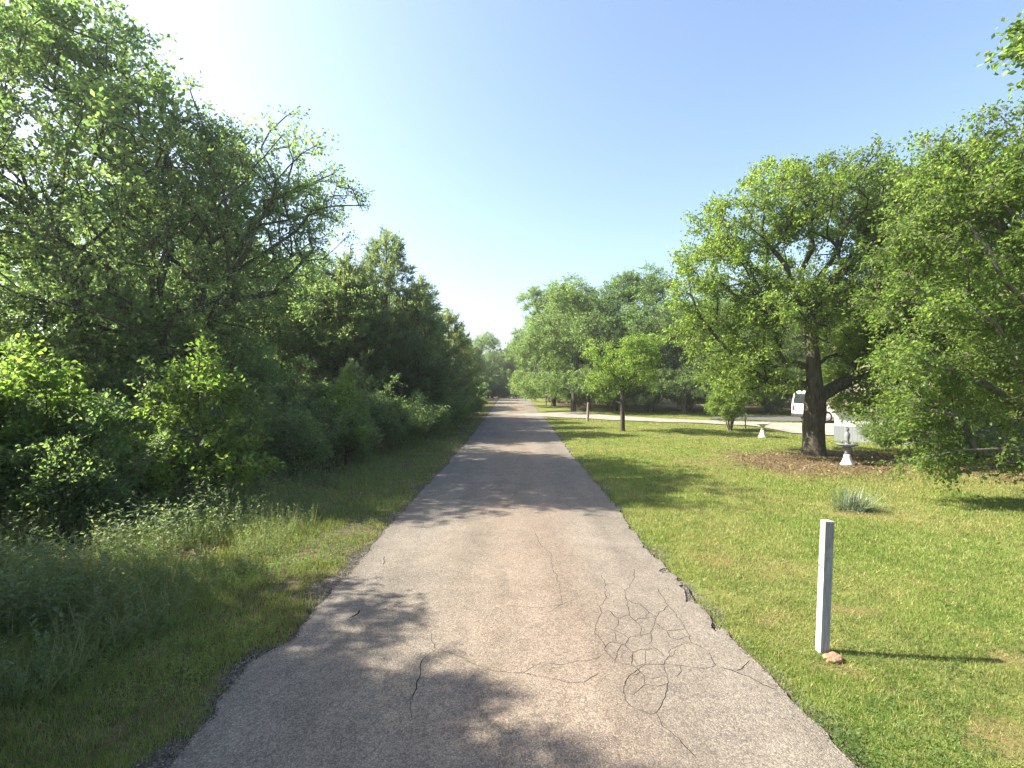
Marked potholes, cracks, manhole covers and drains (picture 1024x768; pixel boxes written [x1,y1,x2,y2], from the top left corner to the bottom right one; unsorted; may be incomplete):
crack [511,533,573,614]
crack [409,636,602,720]
crack [595,569,716,757]
